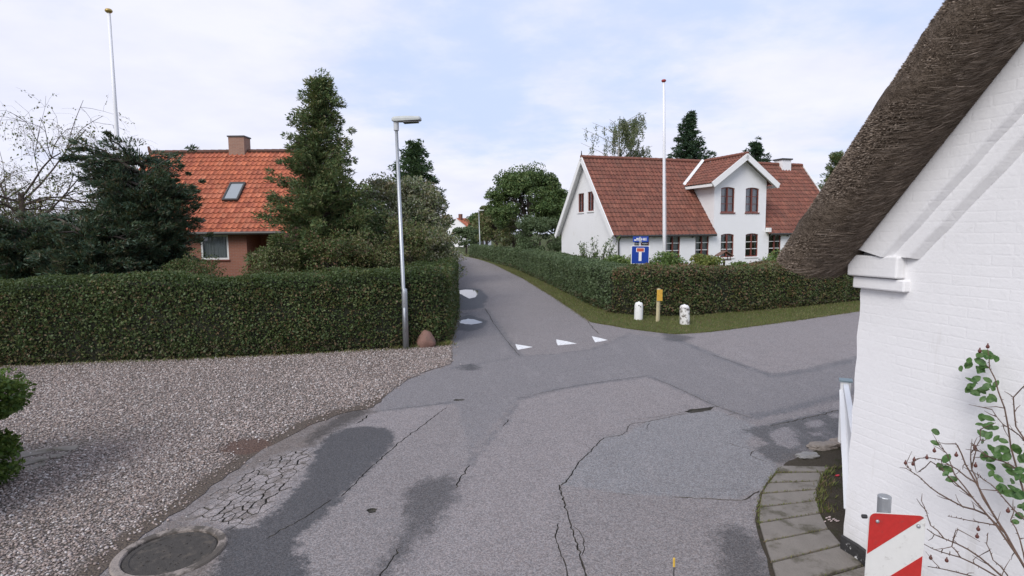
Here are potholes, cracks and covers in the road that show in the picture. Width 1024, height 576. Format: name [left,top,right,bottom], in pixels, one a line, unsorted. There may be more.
crack [554,379,752,576]
crack [187,407,447,538]
manhole cover [109,526,228,576]
